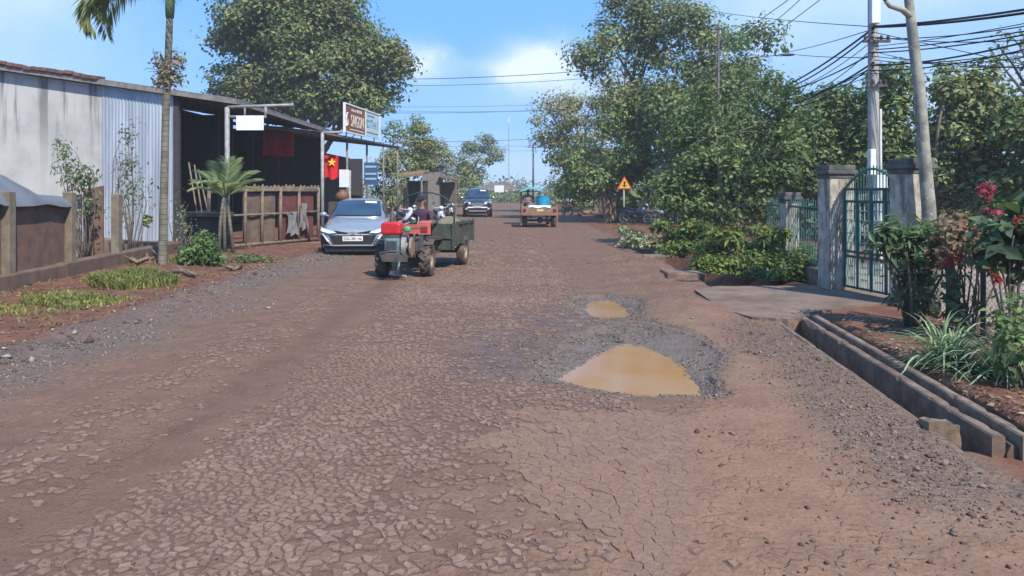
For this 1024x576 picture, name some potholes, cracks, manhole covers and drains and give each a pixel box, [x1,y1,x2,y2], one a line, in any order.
pothole [518,320,727,398]
pothole [565,294,645,319]
